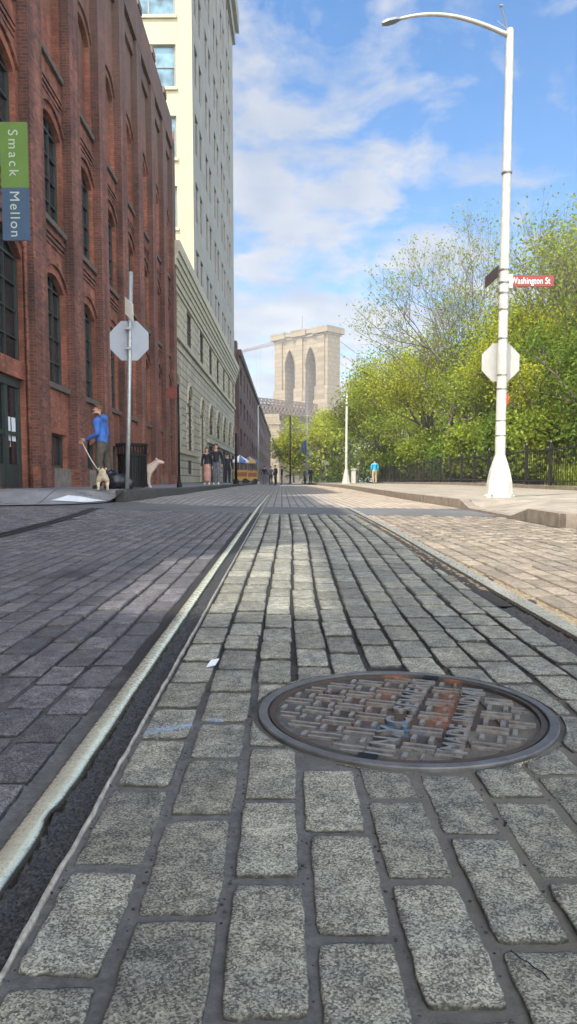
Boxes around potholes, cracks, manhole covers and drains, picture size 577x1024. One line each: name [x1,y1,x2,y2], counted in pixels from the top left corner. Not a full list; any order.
crack [510,950,549,979]
manhole cover [258,671,560,773]
